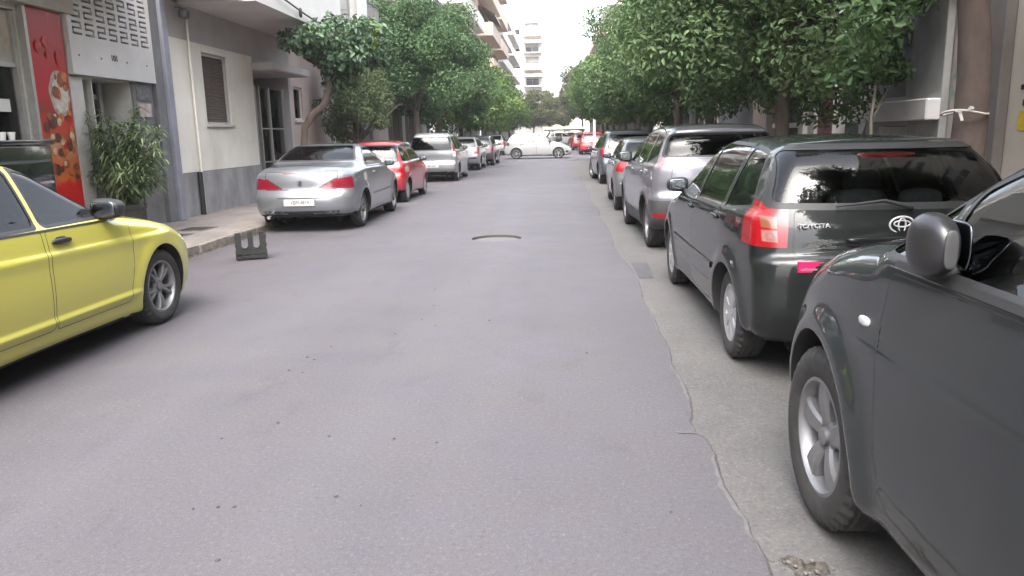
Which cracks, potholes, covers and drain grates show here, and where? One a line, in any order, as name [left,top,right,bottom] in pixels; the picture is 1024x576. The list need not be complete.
pothole [769,554,844,576]
crack [653,316,774,576]
